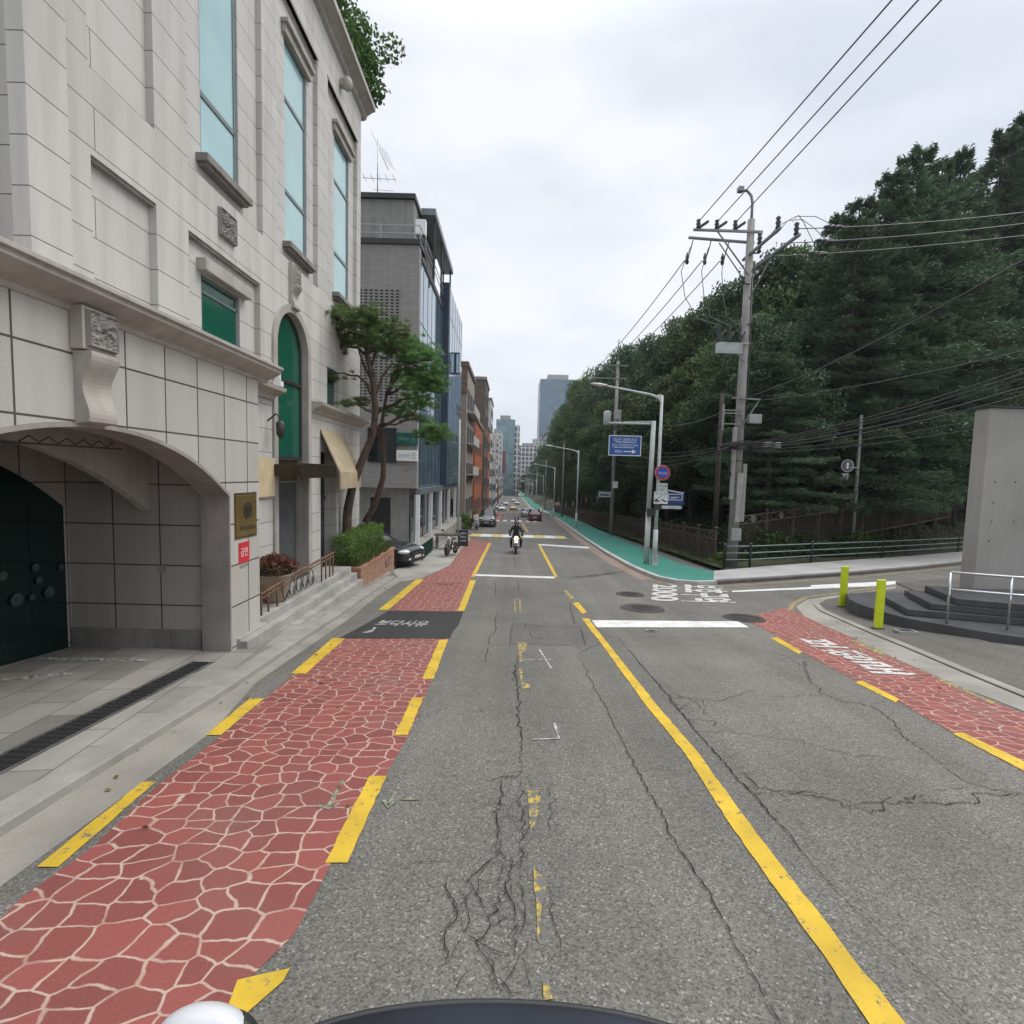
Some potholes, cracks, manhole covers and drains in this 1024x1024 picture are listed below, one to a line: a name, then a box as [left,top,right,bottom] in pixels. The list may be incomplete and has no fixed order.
drain grate [0,661,214,775]
manhole cover [620,604,665,613]
manhole cover [722,613,766,622]
crack [579,642,781,1024]
crack [620,640,1019,890]
crack [419,772,561,999]
